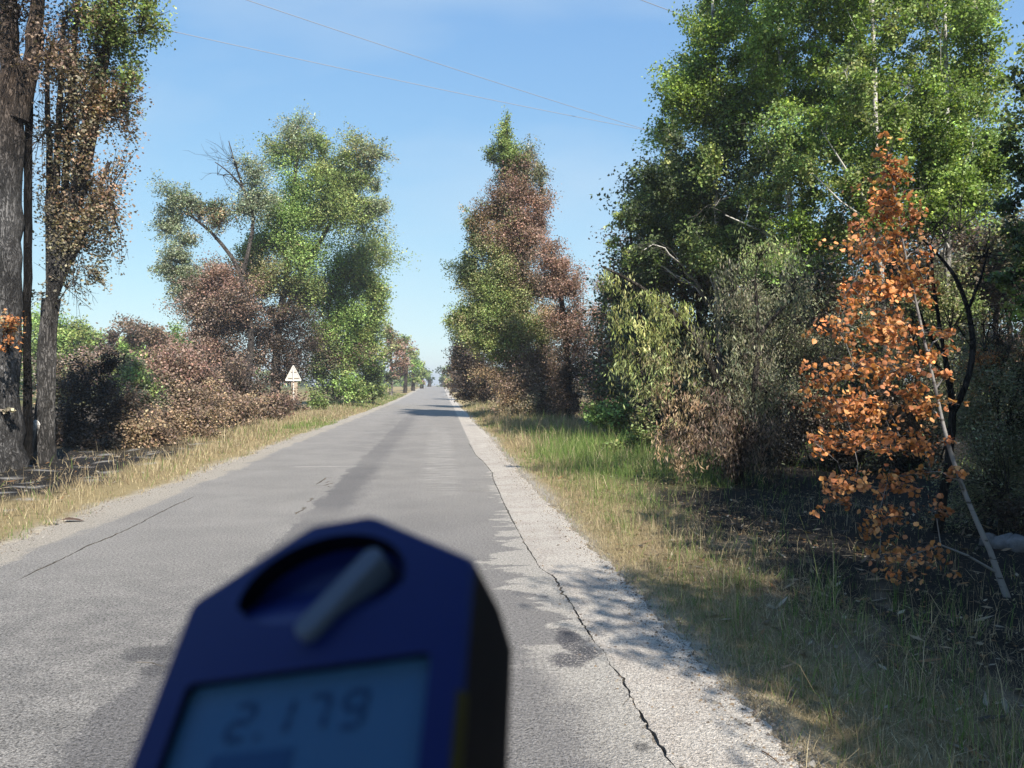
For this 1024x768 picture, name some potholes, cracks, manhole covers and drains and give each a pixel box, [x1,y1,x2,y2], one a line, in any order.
crack [4,496,195,588]
crack [469,444,676,768]
